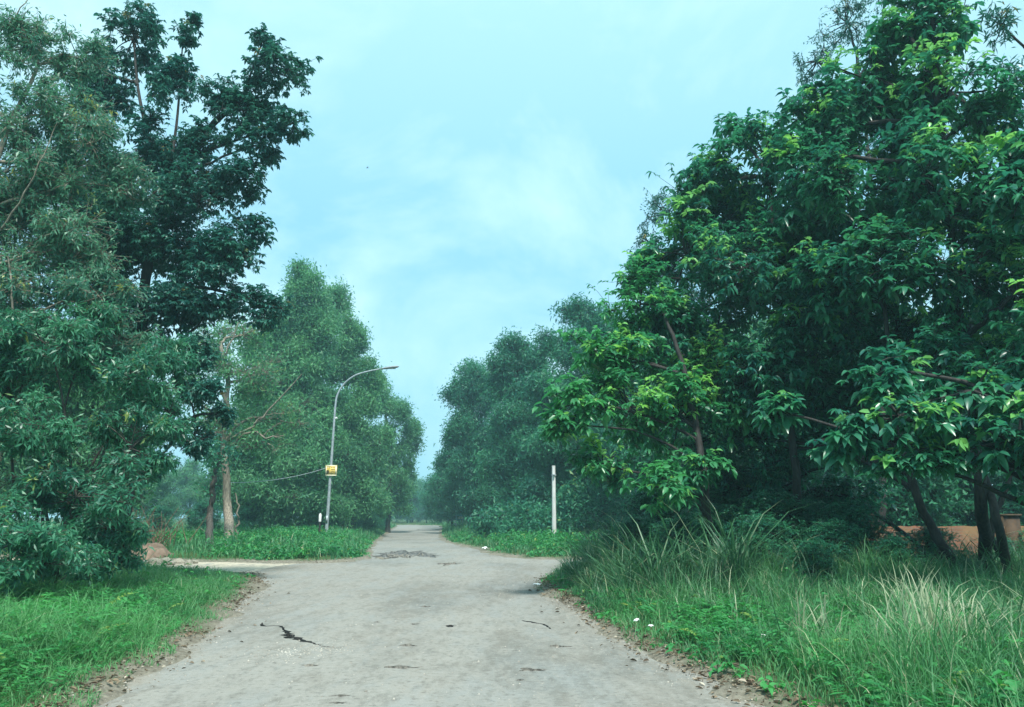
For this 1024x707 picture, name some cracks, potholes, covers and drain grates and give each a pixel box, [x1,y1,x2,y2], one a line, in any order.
crack [260,622,329,647]
pothole [373,550,437,560]
